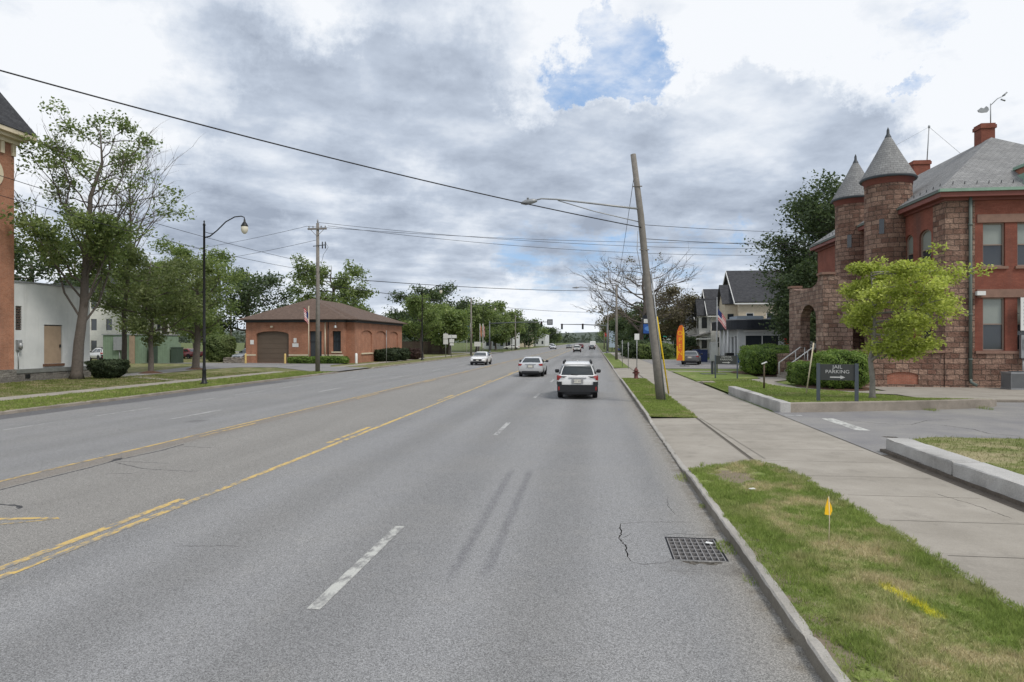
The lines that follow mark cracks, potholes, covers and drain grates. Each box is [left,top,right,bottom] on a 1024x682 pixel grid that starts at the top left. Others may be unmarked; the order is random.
crack [619,499,690,565]
drain grate [665,537,729,562]
